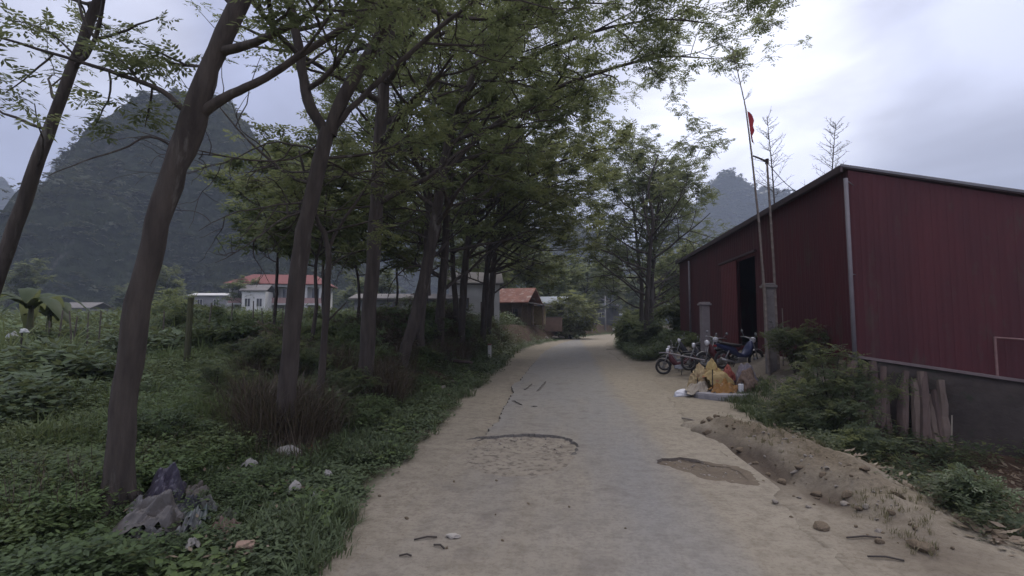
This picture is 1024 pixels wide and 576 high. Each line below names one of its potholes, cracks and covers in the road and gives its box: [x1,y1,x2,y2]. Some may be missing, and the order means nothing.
pothole [657,457,760,486]
crack [512,381,546,405]
